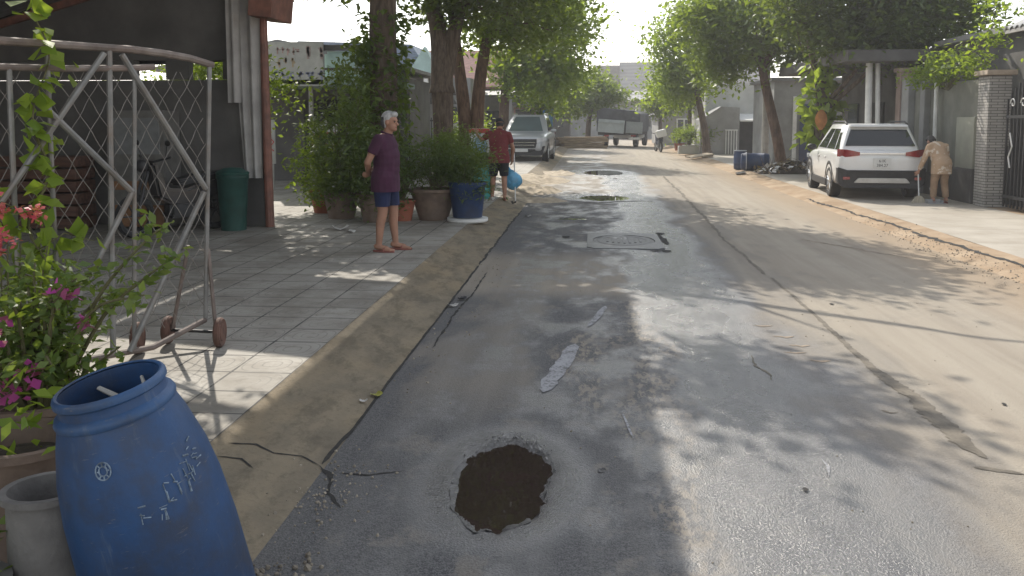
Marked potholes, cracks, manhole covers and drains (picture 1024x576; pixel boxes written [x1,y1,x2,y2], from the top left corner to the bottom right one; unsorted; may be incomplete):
crack [220,443,317,468]
pothole [450,436,553,534]
crack [751,325,831,379]
manhole cover [587,233,665,250]
